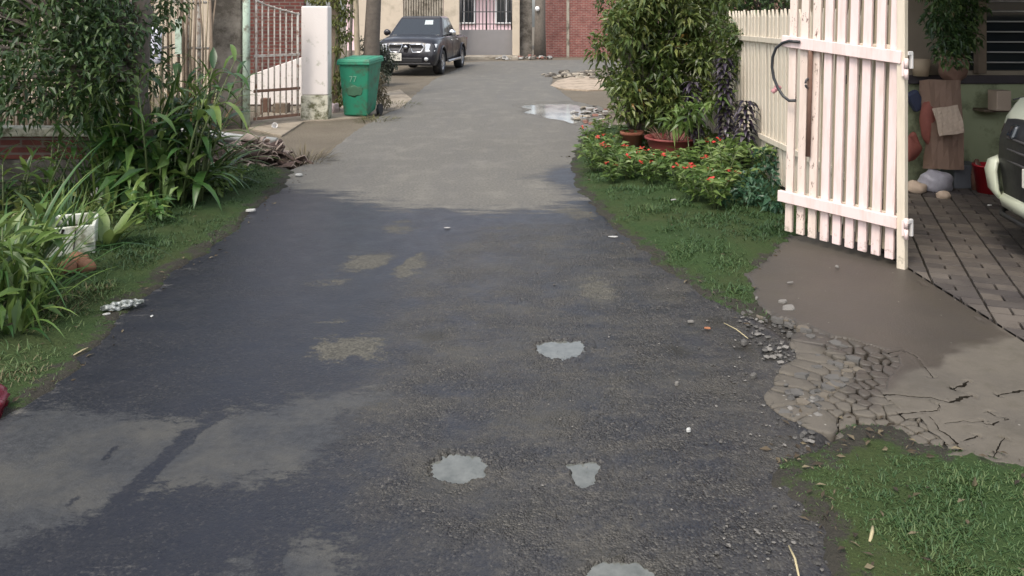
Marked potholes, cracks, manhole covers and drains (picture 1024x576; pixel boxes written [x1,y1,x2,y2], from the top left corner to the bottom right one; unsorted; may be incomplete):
pothole [413,442,505,494]
pothole [565,547,672,576]
crack [764,331,1024,459]
pothole [552,451,615,498]
pothole [523,335,596,364]
